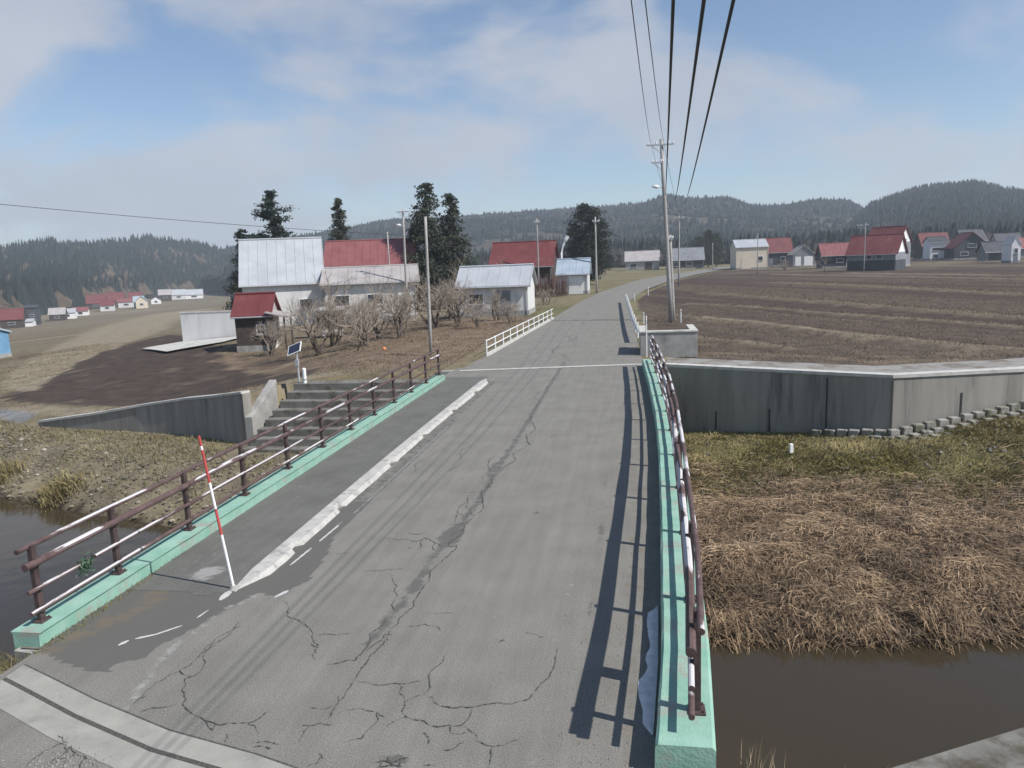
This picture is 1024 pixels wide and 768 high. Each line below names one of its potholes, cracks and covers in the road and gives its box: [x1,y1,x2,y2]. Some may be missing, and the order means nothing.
crack [359,649,558,762]
crack [299,696,385,766]
crack [128,623,282,748]
crack [286,602,347,657]
